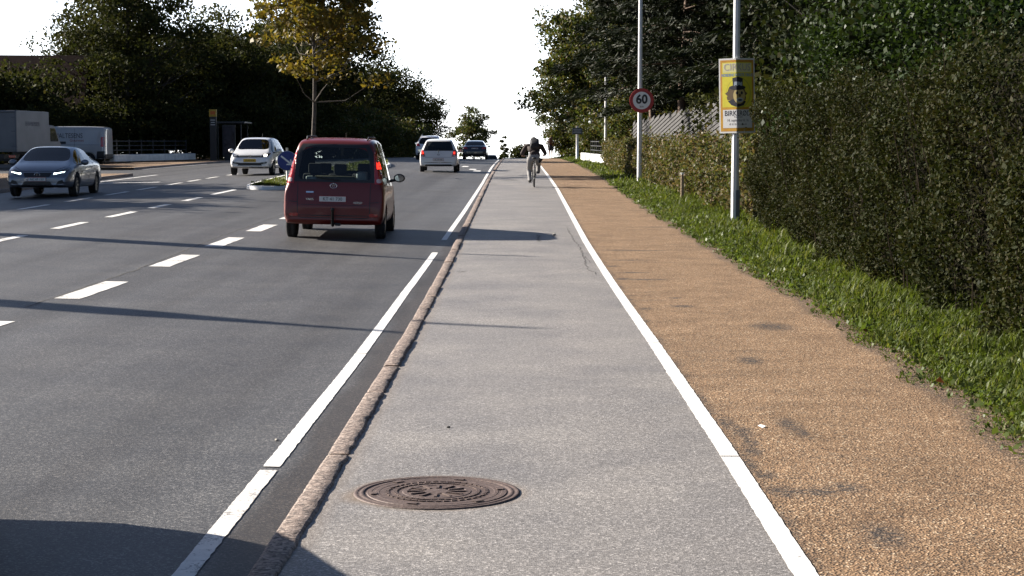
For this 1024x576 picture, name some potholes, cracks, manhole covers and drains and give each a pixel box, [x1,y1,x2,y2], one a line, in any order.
manhole cover [354,476,520,510]
